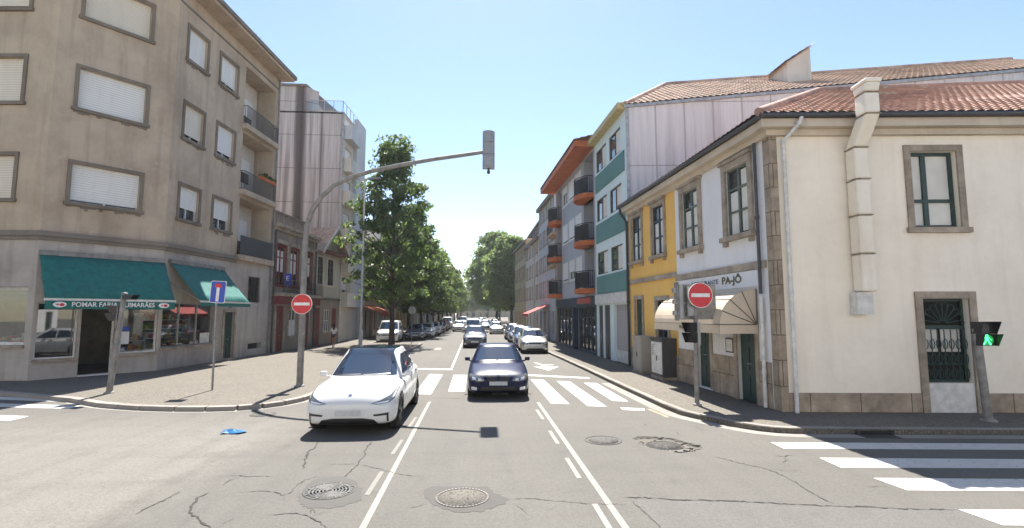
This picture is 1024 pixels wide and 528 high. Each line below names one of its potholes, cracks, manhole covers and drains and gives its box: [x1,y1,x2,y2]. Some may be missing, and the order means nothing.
crack [136,441,412,528]
manhole cover [646,441,683,450]
manhole cover [435,488,489,508]
manhole cover [584,435,622,445]
